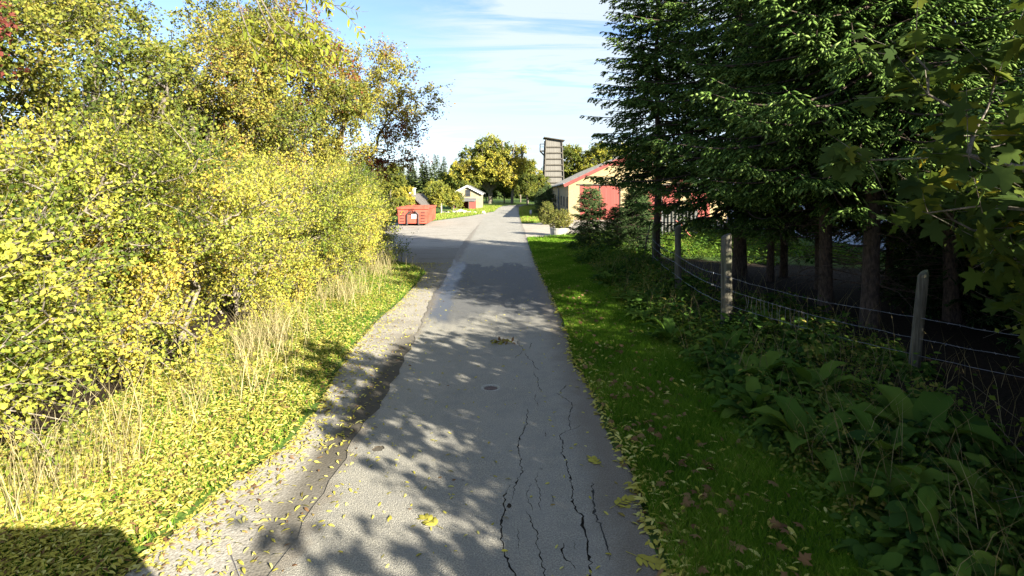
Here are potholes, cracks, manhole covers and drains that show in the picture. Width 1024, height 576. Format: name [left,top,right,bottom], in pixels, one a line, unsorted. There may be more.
crack [496,343,611,576]
